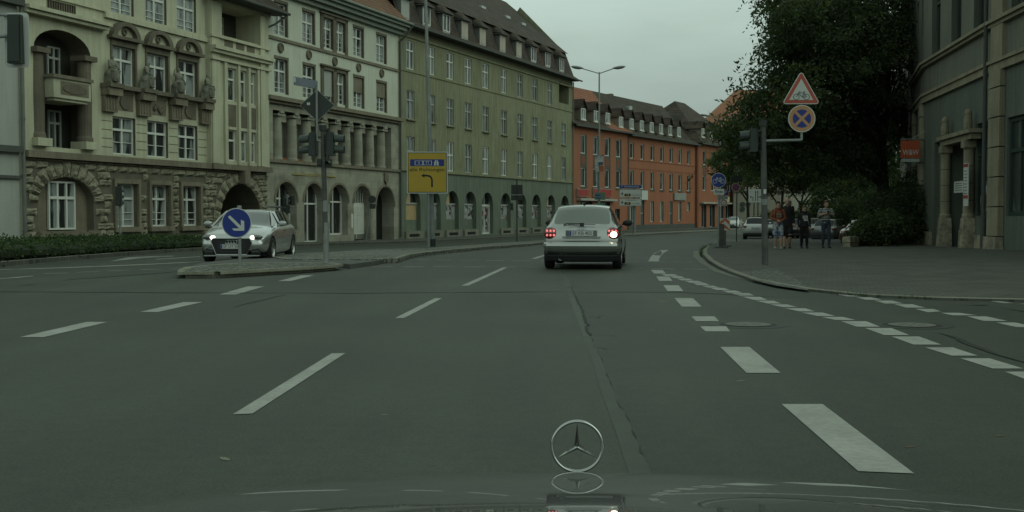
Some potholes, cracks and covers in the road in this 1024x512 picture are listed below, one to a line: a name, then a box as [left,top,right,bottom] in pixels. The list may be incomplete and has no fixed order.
manhole cover [872,321,955,329]
